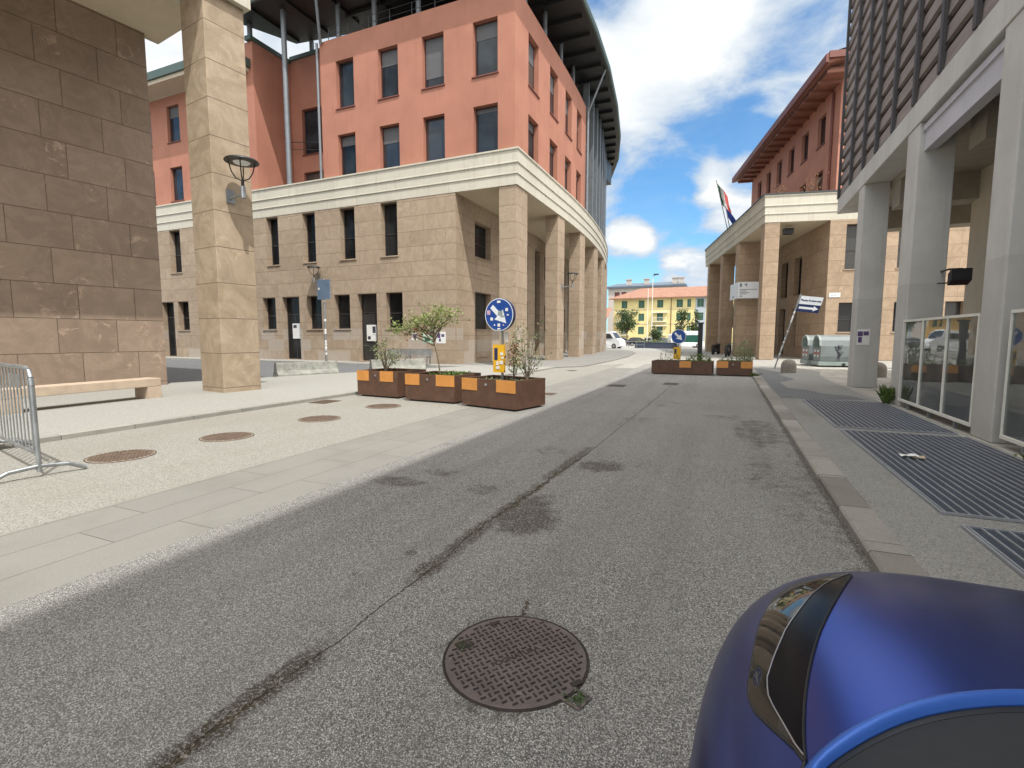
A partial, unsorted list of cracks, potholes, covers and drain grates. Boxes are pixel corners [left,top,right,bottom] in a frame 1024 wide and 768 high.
manhole cover [199,432,254,442]
drain grate [961,524,1024,579]
drain grate [802,399,958,435]
manhole cover [83,449,157,464]
drain grate [840,429,1024,524]
crack [160,386,671,768]
manhole cover [442,616,592,712]
